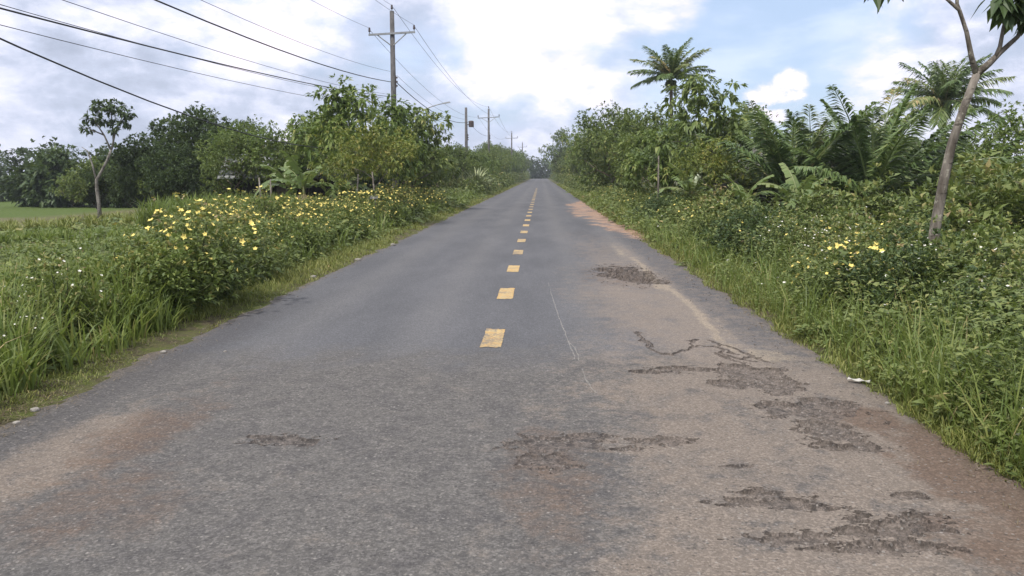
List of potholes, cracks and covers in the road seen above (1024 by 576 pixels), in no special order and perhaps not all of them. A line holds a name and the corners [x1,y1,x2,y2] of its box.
pothole [743,396,902,453]
pothole [809,509,974,557]
pothole [593,264,672,285]
pothole [606,435,700,452]
pothole [492,432,626,476]
pothole [235,433,339,447]
pothole [628,361,810,397]
crack [548,283,597,393]
pothole [697,486,856,513]
crack [634,331,775,364]
pothole [888,491,933,500]
